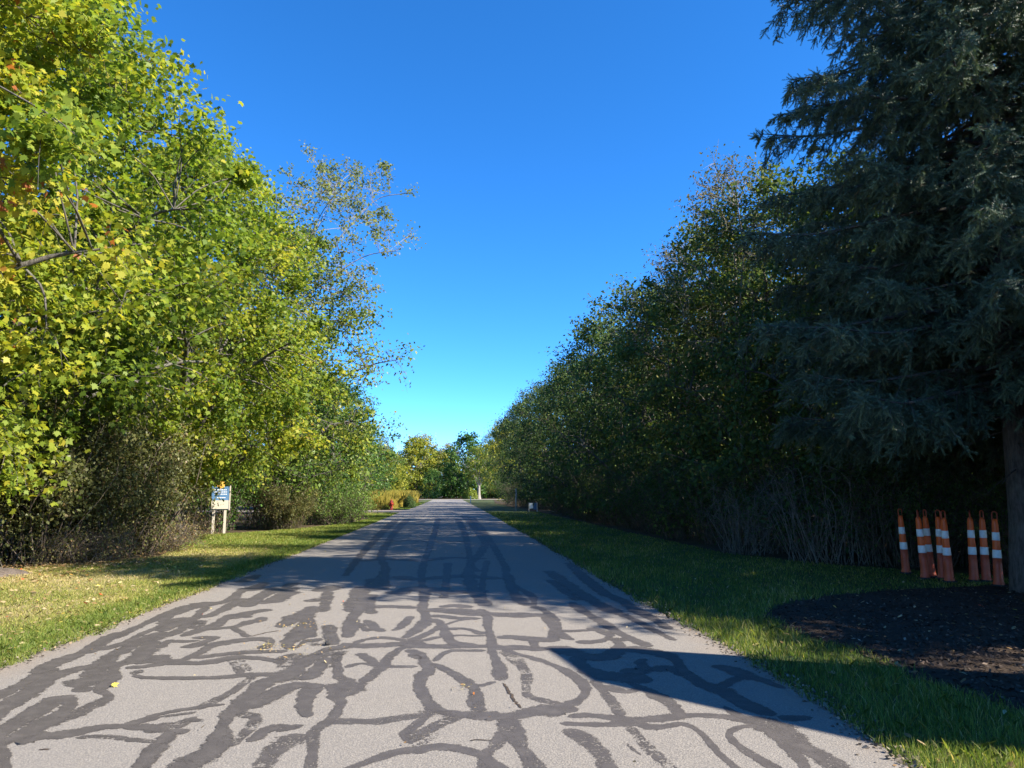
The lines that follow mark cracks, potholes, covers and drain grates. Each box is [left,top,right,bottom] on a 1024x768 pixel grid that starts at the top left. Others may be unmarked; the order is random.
crack [503,683,522,708]
